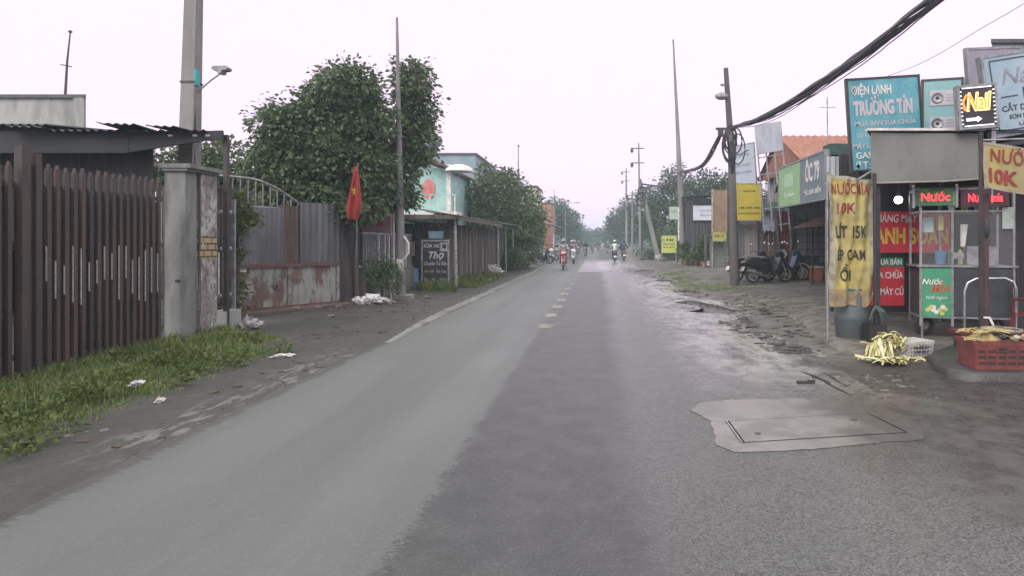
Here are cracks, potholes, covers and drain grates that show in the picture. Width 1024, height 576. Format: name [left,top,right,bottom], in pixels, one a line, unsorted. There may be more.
manhole cover [690,398,925,453]
pothole [675,300,737,314]
